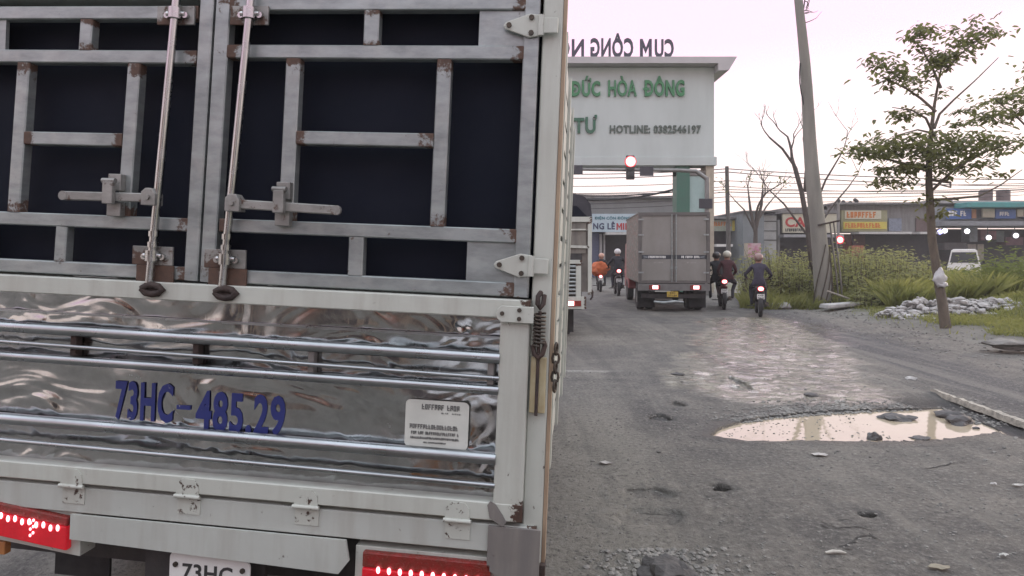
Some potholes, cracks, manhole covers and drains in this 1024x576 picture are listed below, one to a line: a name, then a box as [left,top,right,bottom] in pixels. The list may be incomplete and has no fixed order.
crack [821,519,880,549]
pothole [694,405,1020,448]
pothole [598,479,703,515]
pothole [719,374,760,393]
